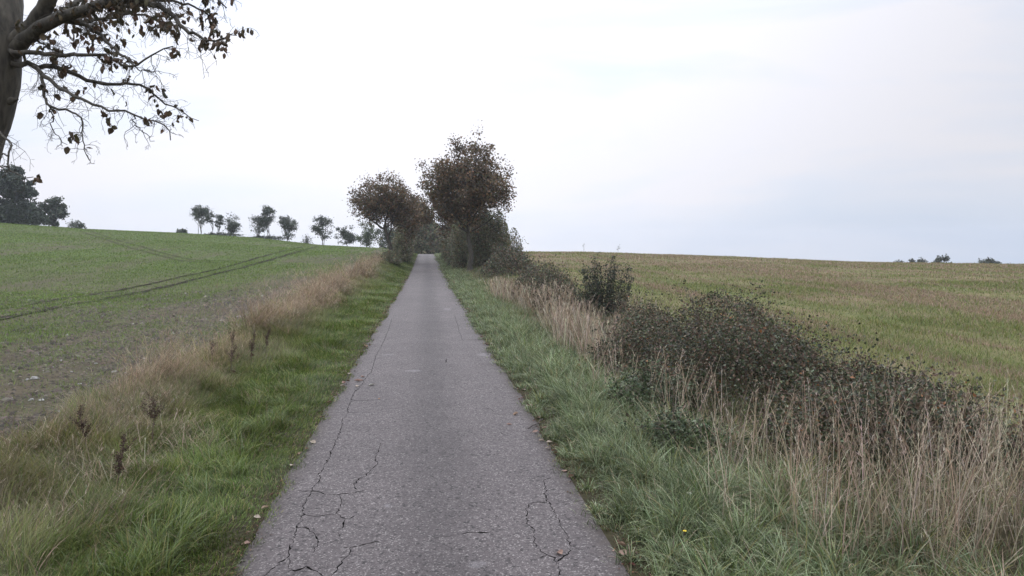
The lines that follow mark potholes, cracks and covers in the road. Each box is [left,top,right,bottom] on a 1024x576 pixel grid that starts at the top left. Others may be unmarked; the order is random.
crack [525,478,583,575]
crack [264,324,390,576]
